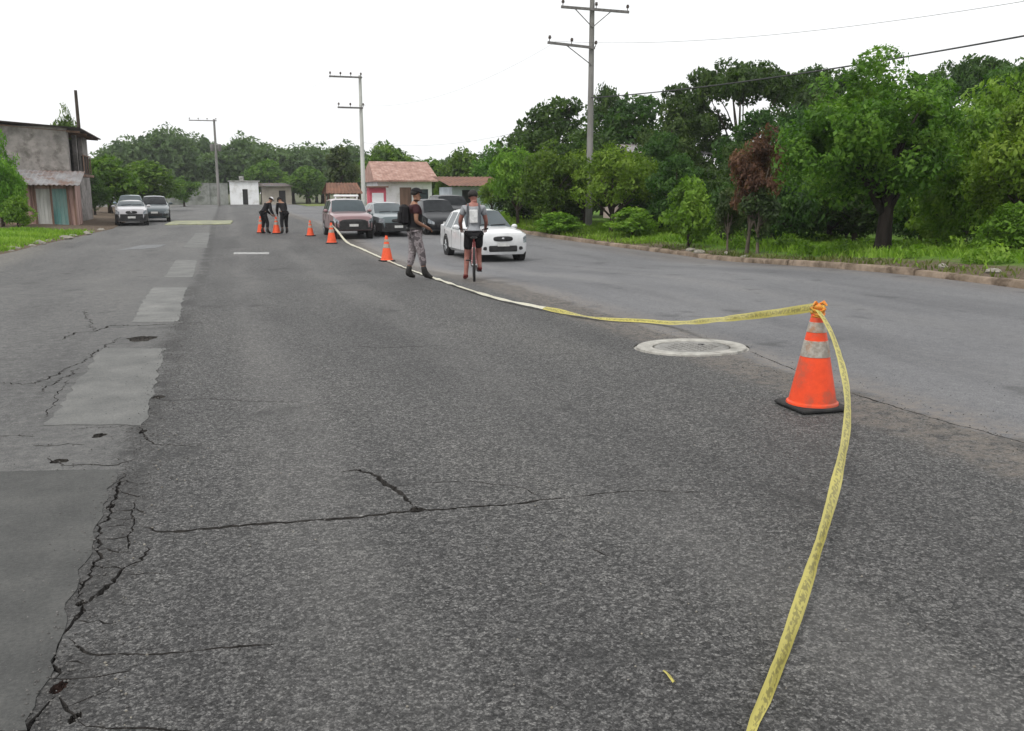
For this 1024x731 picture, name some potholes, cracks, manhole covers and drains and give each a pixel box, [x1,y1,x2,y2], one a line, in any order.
manhole cover [634,338,750,357]
crack [3,310,200,416]
crack [12,423,709,731]
